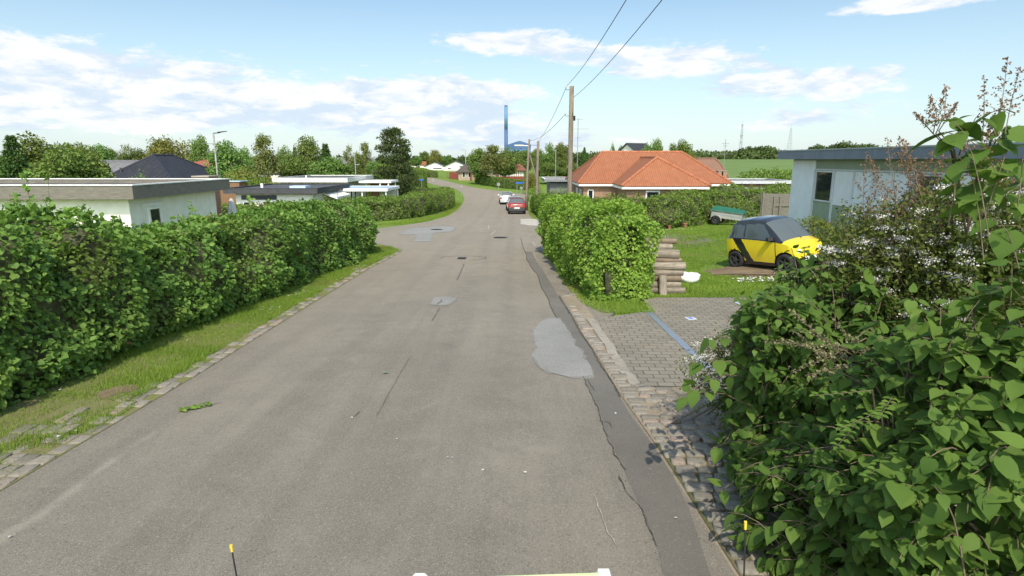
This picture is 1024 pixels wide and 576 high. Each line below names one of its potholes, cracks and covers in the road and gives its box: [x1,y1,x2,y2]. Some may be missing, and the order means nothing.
crack [584,377,657,547]
